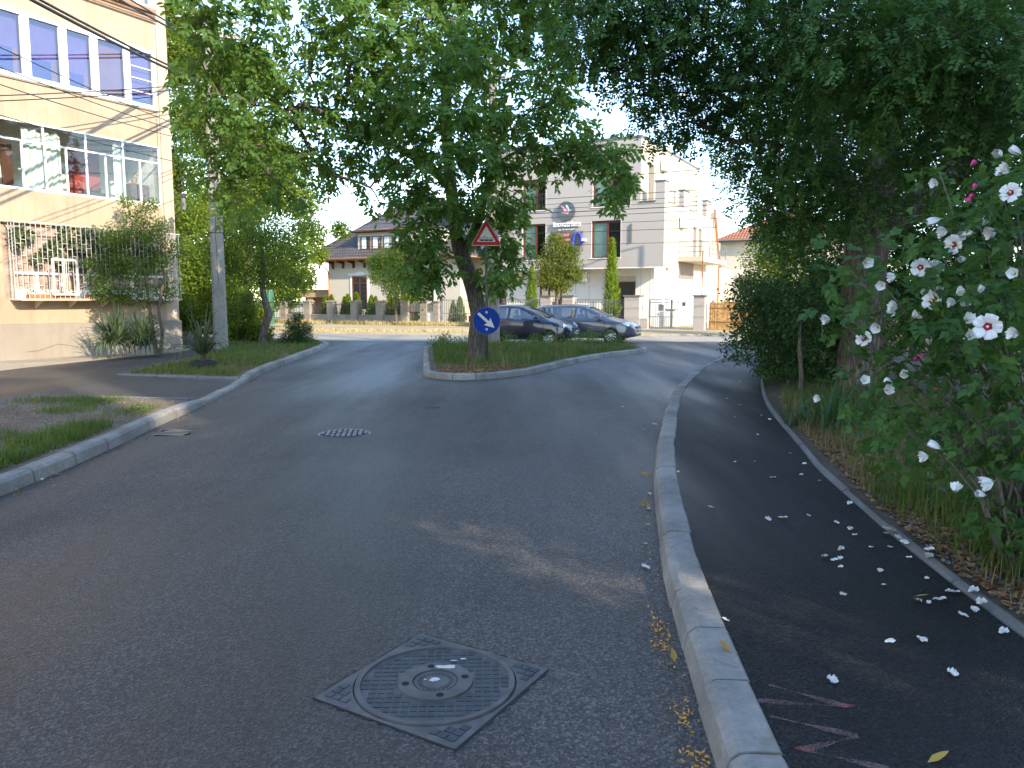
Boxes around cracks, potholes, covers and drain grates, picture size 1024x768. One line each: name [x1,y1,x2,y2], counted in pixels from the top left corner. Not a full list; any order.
manhole cover [312,633,550,751]
drain grate [151,429,199,437]
